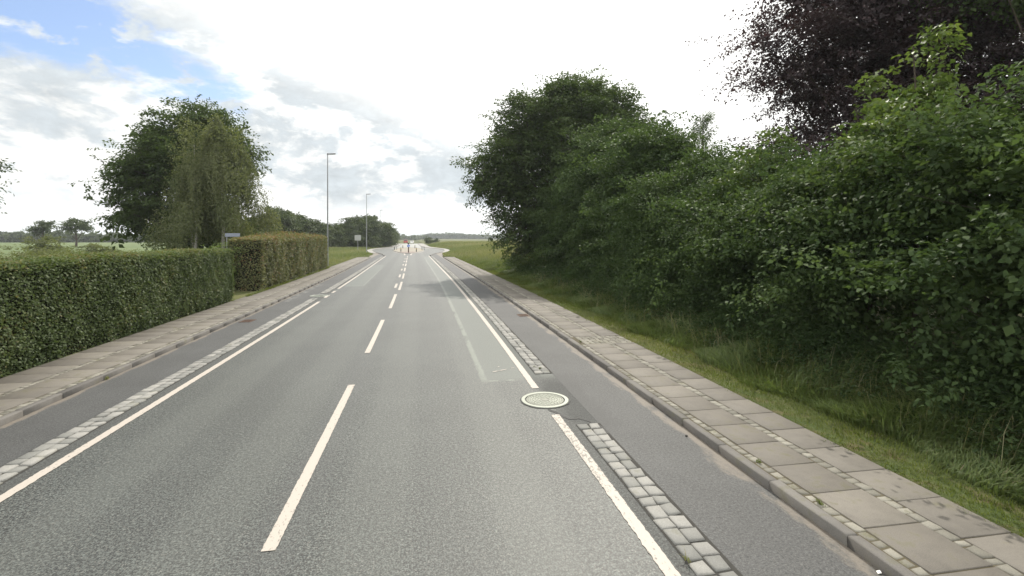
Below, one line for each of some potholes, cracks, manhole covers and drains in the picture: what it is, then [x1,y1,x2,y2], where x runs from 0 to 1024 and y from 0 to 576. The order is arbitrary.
manhole cover [520,392,570,409]
